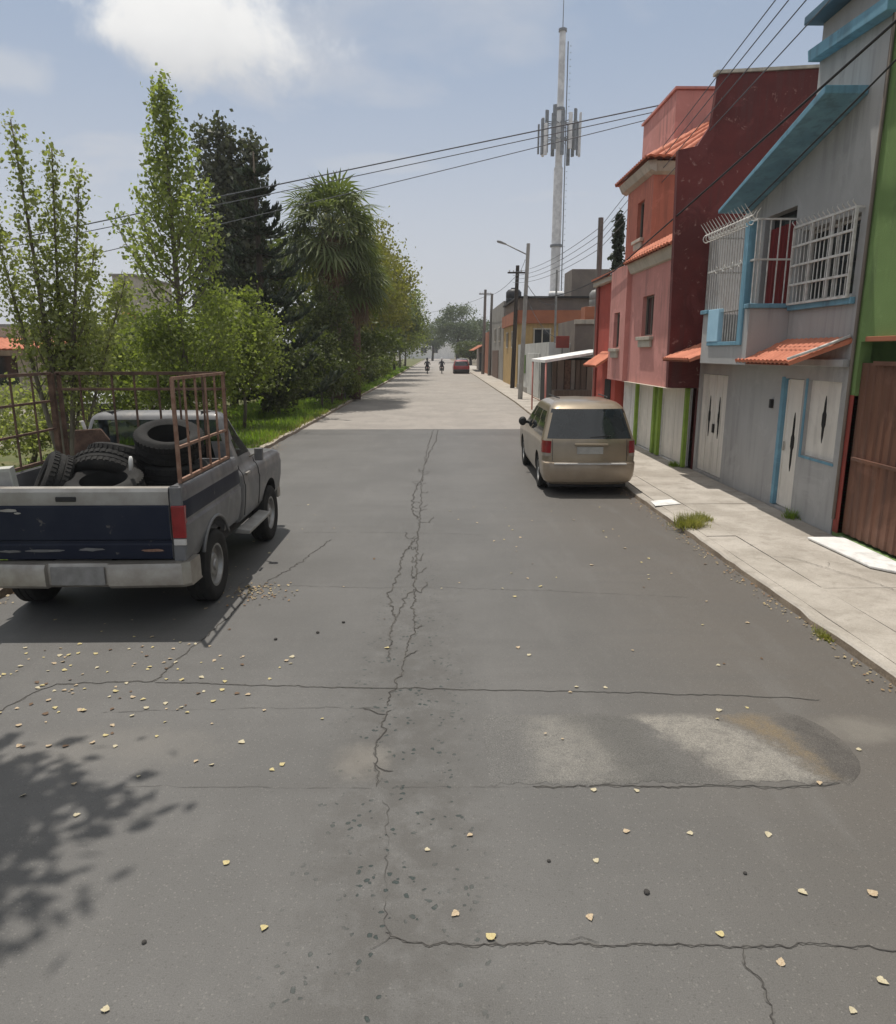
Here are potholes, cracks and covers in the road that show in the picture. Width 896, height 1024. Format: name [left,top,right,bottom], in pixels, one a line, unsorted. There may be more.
crack [107,430,896,1024]
